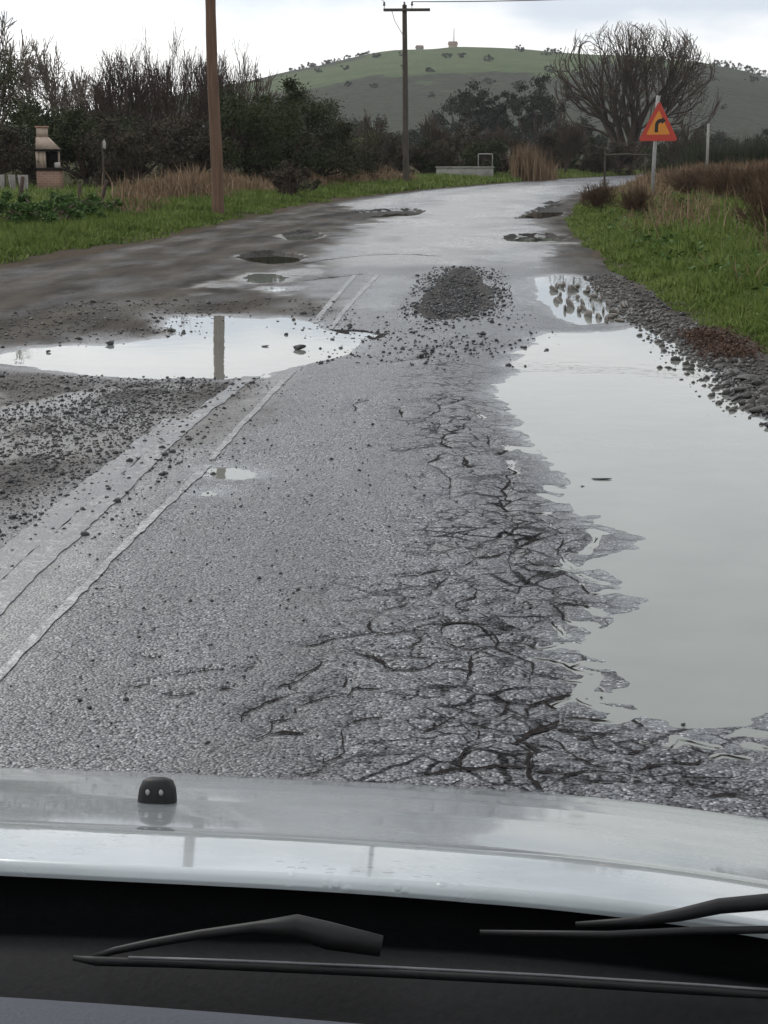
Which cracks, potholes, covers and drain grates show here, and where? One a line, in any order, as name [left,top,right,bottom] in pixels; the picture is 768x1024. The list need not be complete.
pothole [306,208,426,219]
pothole [514,204,567,219]
crack [177,396,768,797]
pothole [502,232,569,241]
pothole [281,230,324,240]
pothole [235,250,309,264]
